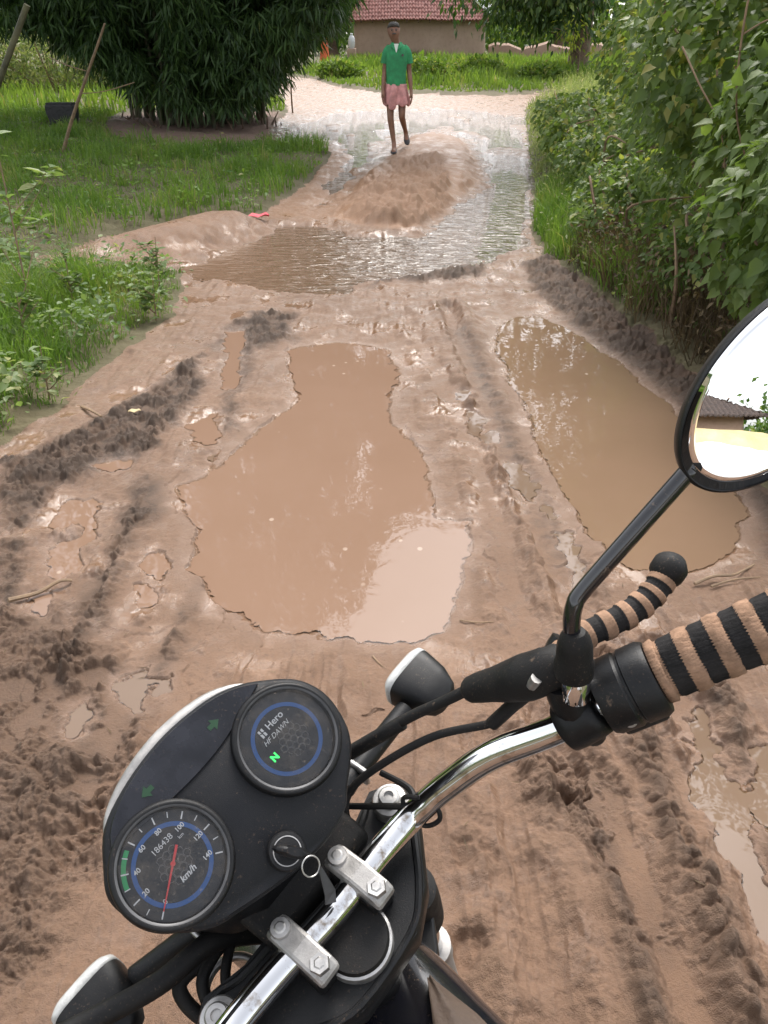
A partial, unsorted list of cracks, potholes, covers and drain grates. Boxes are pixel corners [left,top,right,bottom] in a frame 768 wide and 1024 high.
pothole [488,312,760,580]
pothole [161,340,486,652]
